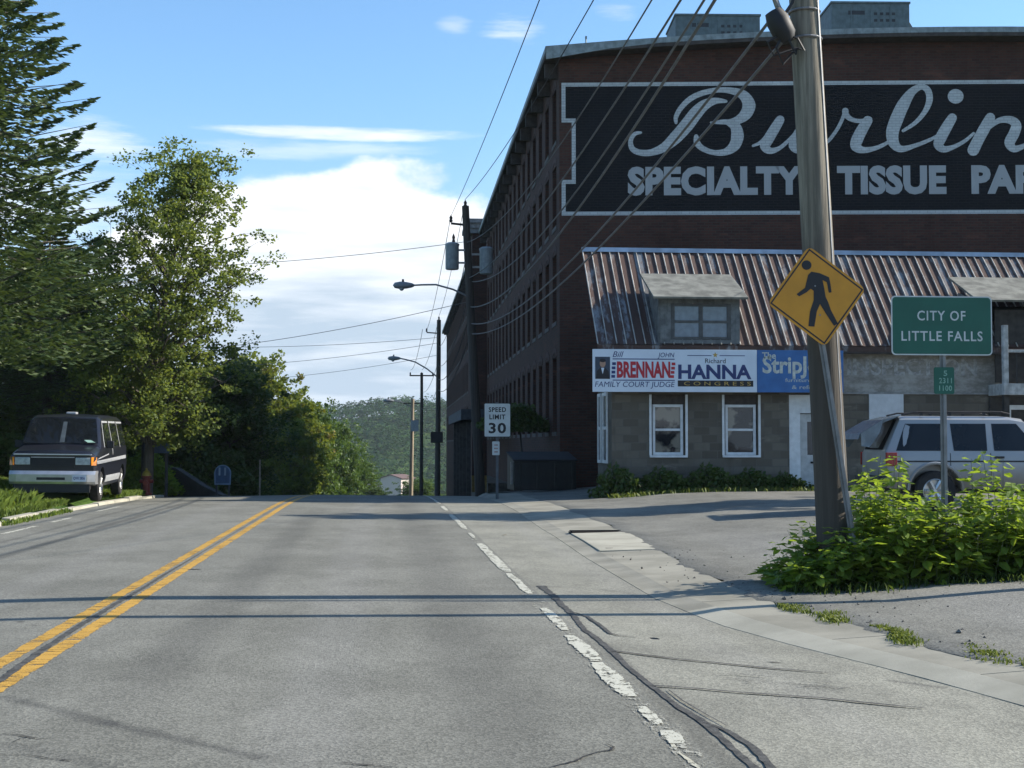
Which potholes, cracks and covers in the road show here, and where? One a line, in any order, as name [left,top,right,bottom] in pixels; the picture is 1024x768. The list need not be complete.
crack [542,743,615,768]
crack [0,733,67,760]
